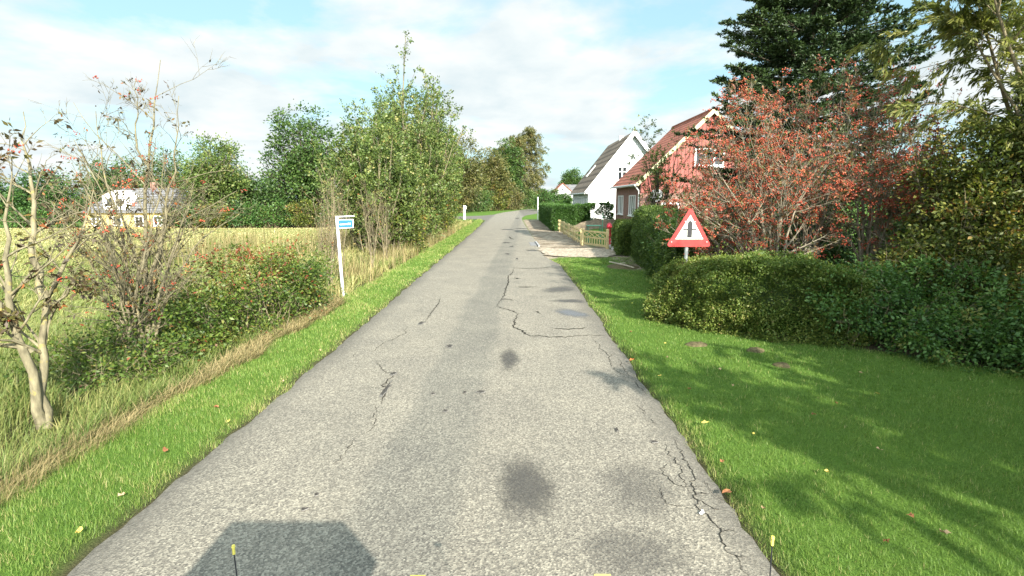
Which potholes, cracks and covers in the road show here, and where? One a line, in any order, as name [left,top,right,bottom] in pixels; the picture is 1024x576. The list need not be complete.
crack [659,441,747,574]
crack [497,268,654,423]
crack [334,331,407,463]
